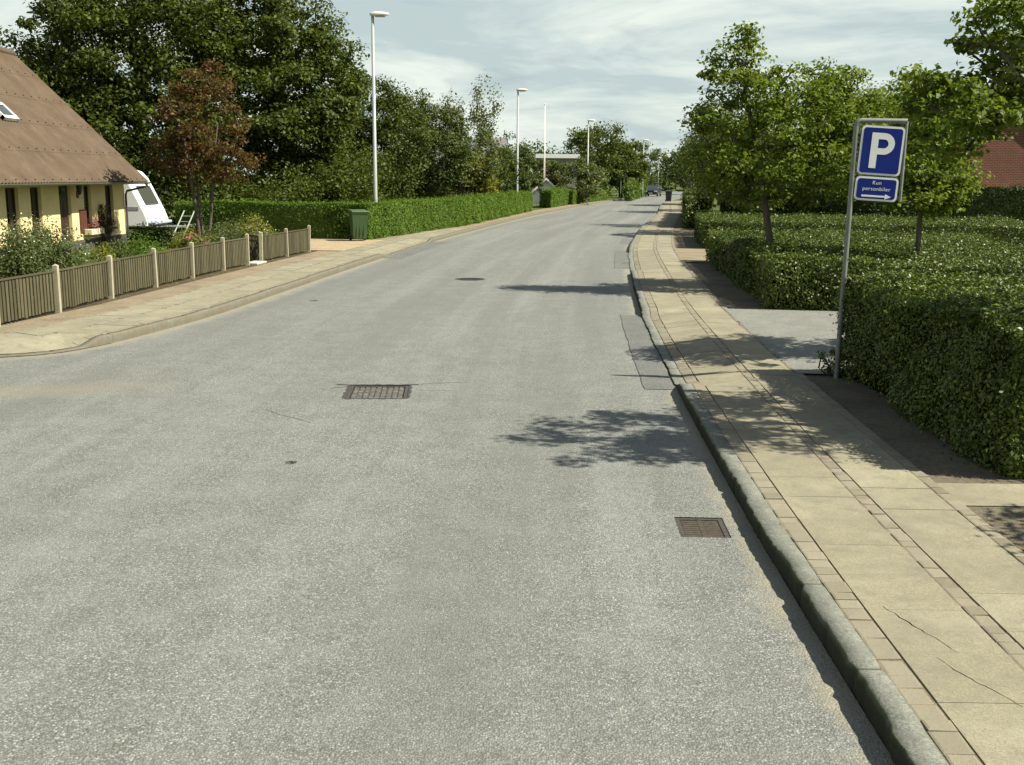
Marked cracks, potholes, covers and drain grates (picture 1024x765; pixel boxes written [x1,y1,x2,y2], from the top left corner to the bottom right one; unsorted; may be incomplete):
drain grate [675,518,731,538]
